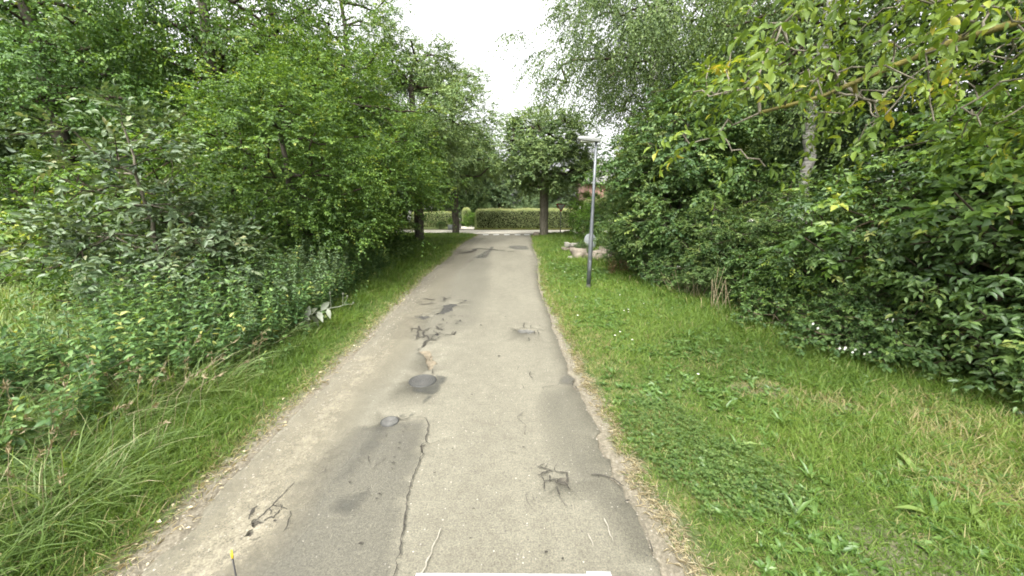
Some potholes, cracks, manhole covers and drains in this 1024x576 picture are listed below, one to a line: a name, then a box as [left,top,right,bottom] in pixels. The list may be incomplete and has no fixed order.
manhole cover [409,374,436,387]
manhole cover [380,416,399,427]
crack [248,482,294,529]
crack [411,297,461,351]
crack [509,463,570,506]
